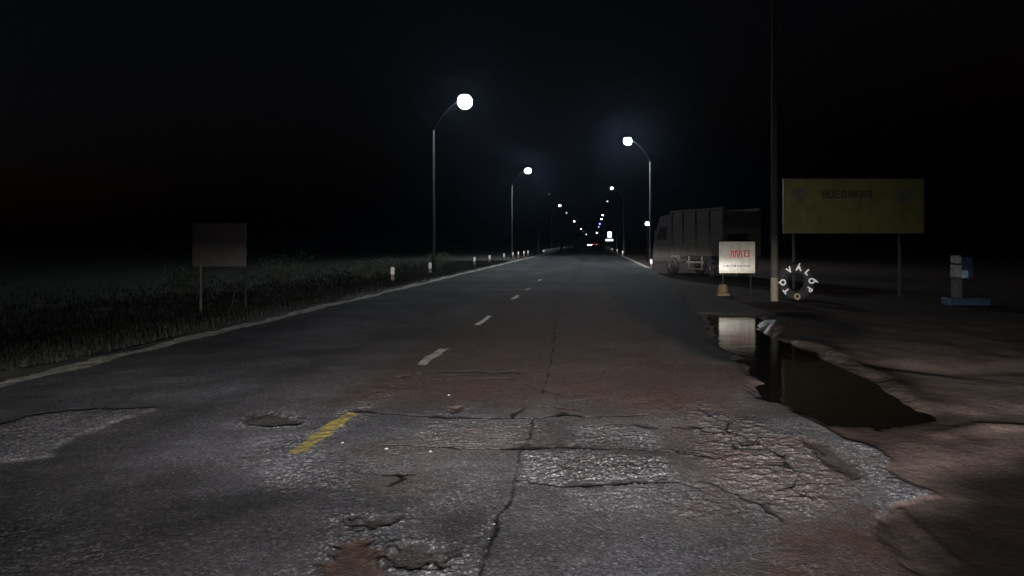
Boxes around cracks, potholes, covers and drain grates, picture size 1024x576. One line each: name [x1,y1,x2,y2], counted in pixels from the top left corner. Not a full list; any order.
pothole [239,412,306,427]
crack [335,468,417,487]
pothole [311,533,394,576]
pothole [382,540,469,572]
pothole [342,513,406,532]
crack [350,371,816,522]
